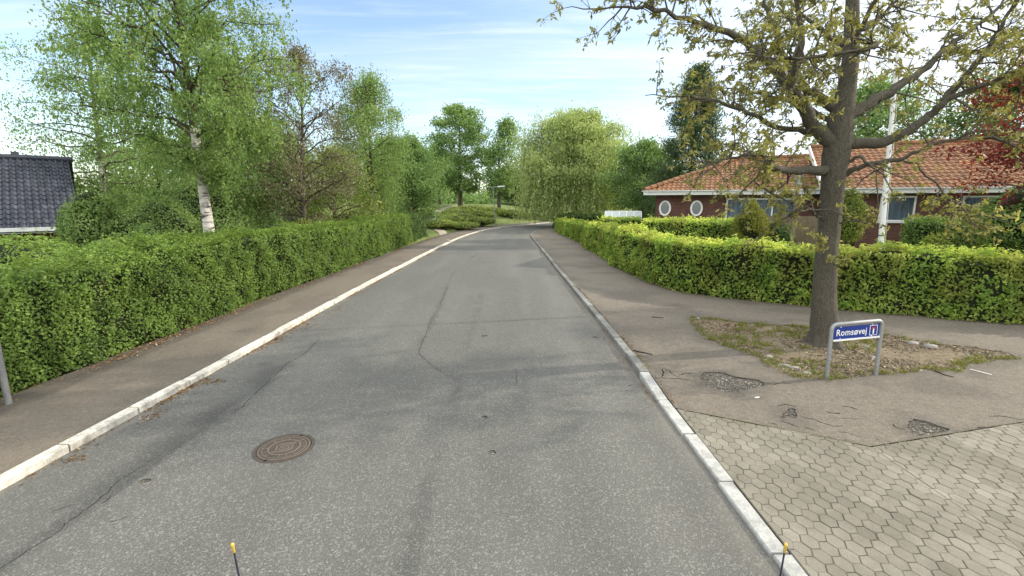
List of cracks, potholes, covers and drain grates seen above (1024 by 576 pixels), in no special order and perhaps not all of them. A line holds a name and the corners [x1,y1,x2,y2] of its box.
pothole [781,408,797,419]
pothole [701,372,764,393]
manhole cover [252,434,315,463]
pothole [907,419,949,436]
